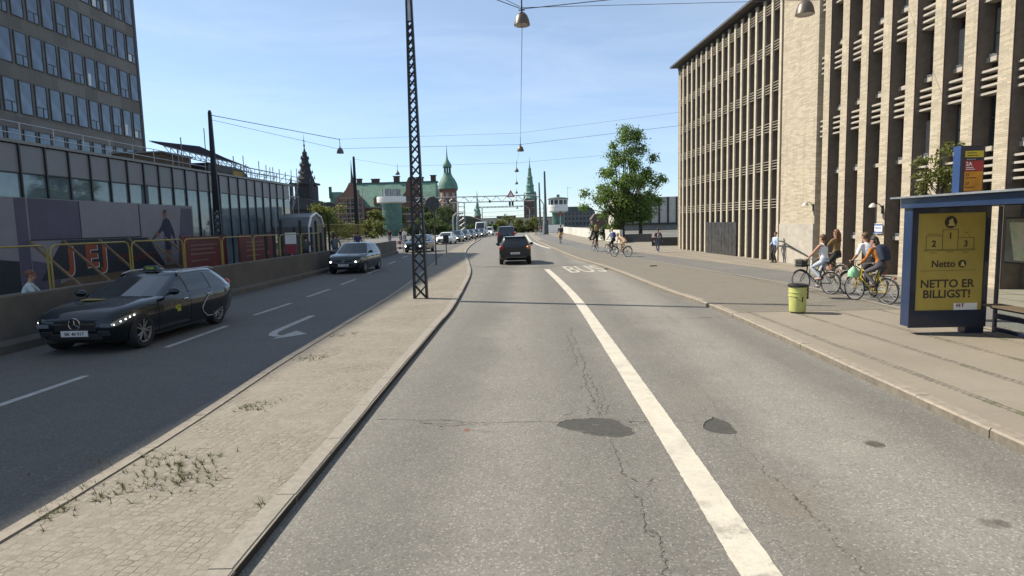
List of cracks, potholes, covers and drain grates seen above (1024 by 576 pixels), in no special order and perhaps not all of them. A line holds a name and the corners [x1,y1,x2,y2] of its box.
pothole [703,417,738,434]
crack [388,327,695,432]
crack [610,442,669,575]
pothole [557,418,637,437]
